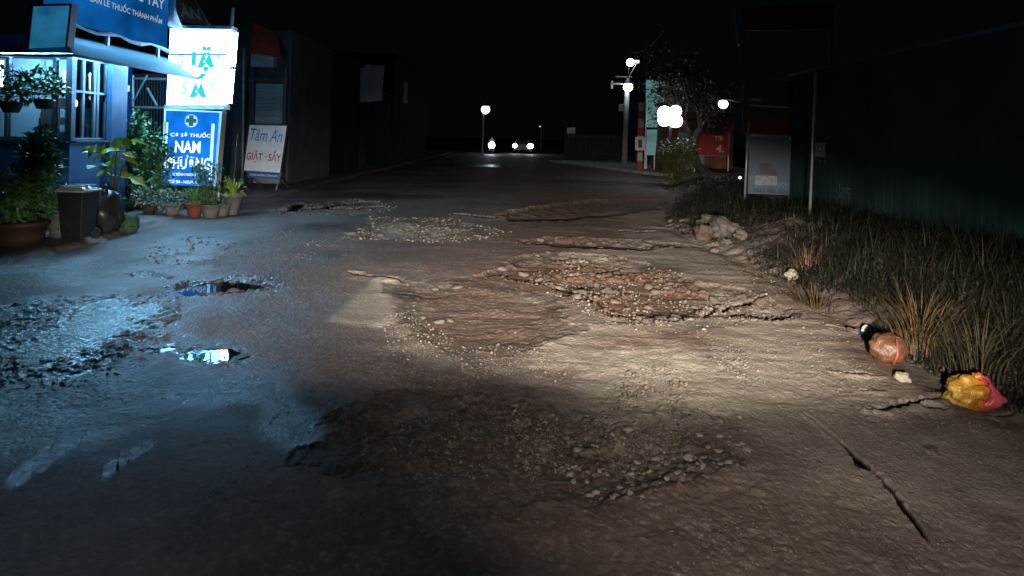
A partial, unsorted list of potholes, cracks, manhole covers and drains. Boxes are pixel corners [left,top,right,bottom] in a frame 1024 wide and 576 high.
pothole [128,341,261,369]
crack [806,413,934,547]
pothole [351,221,486,242]
pothole [511,235,704,252]
pothole [379,276,594,358]
pothole [0,292,188,388]
pothole [470,251,806,325]
pothole [157,273,292,298]
pothole [271,381,754,535]
crack [843,371,949,411]
pothole [491,198,670,222]
